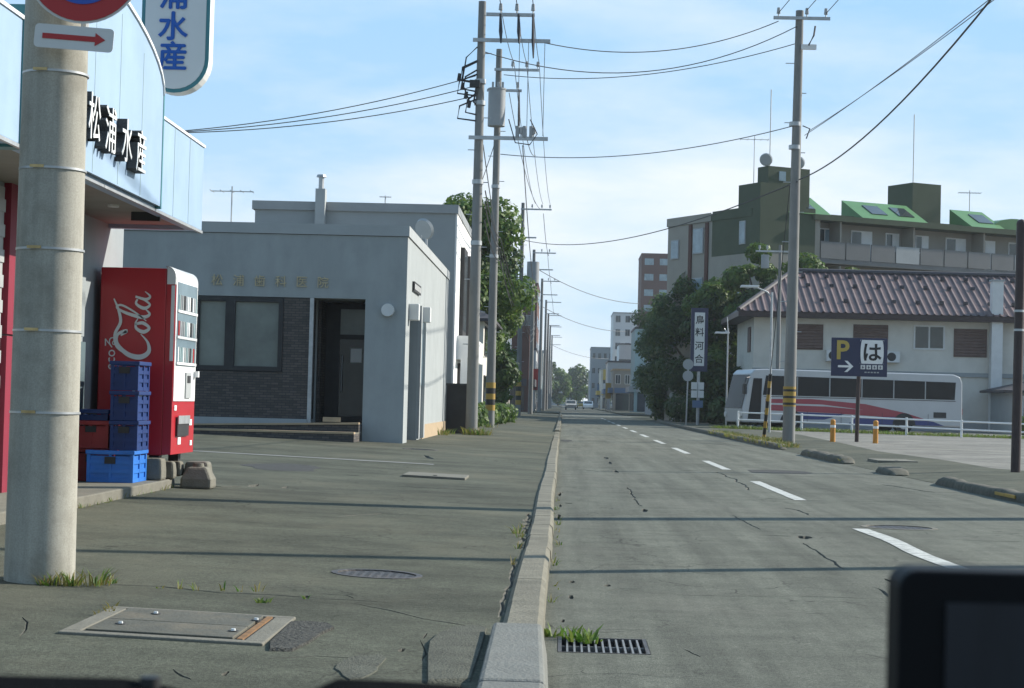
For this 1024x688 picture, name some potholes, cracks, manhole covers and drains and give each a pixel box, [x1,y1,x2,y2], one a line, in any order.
manhole cover [331,569,423,579]
manhole cover [402,472,469,480]
manhole cover [58,606,296,646]
drain grate [557,637,651,655]
crack [803,543,843,569]
